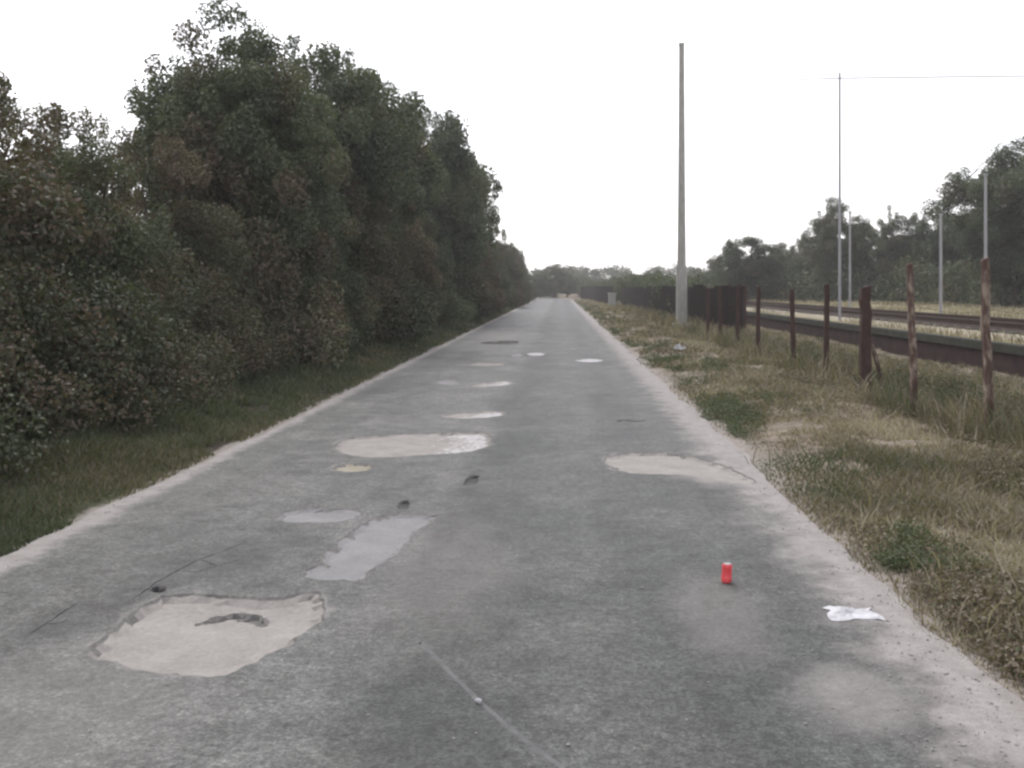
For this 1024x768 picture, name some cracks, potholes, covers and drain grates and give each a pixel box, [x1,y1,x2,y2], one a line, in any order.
crack [28,604,75,635]
pothole [397,500,411,509]
pothole [463,475,480,486]
pothole [83,590,327,677]
crack [136,541,246,597]
